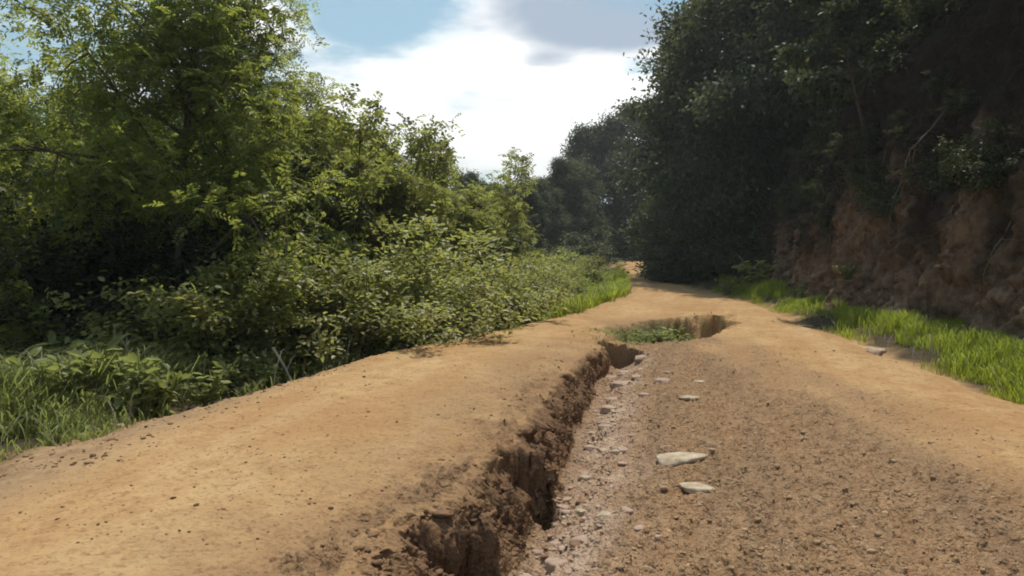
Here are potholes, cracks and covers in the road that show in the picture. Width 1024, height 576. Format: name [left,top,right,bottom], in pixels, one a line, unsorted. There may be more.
pothole [597,315,745,345]
crack [372,346,611,576]
